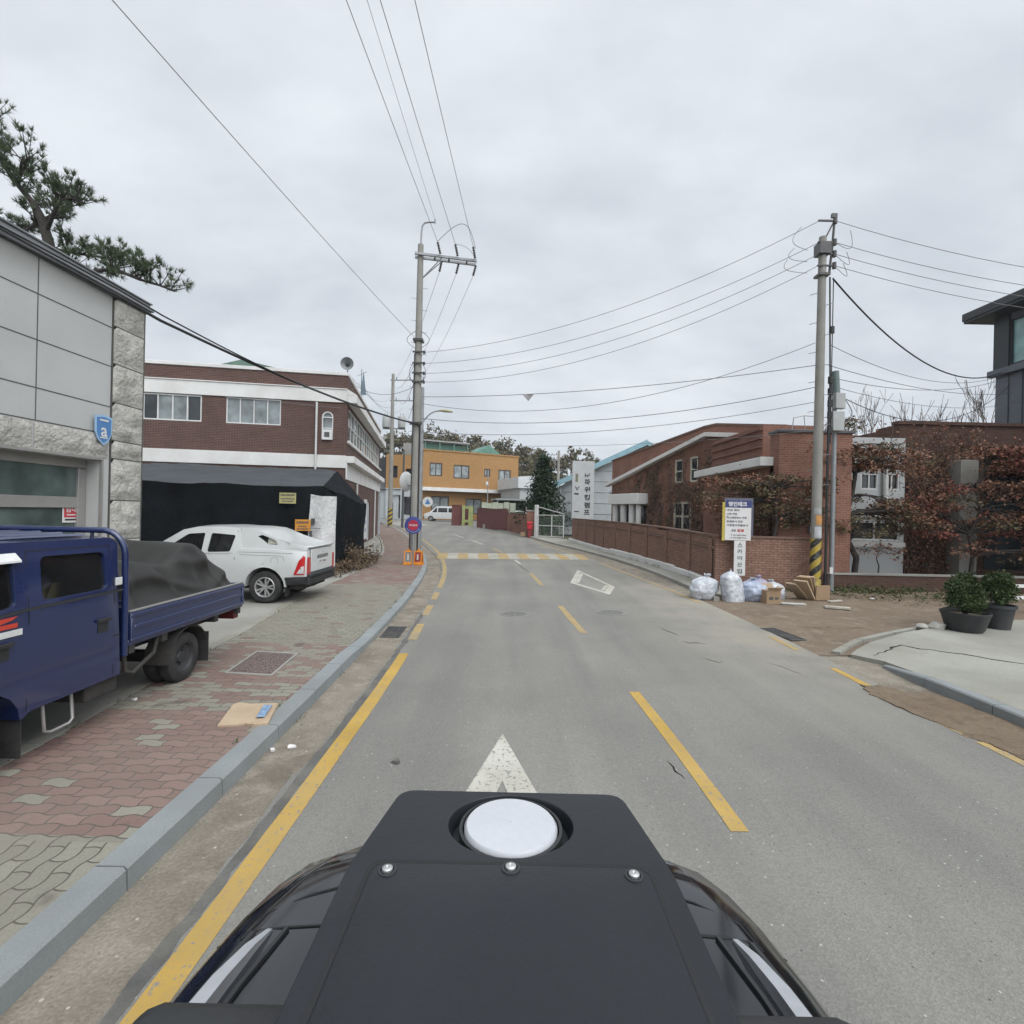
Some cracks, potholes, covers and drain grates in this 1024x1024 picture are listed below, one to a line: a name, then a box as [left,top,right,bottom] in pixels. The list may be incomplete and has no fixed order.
crack [874,645,1023,664]
drain grate [760,627,807,641]
manhole cover [224,651,299,676]
drain grate [380,626,407,638]
